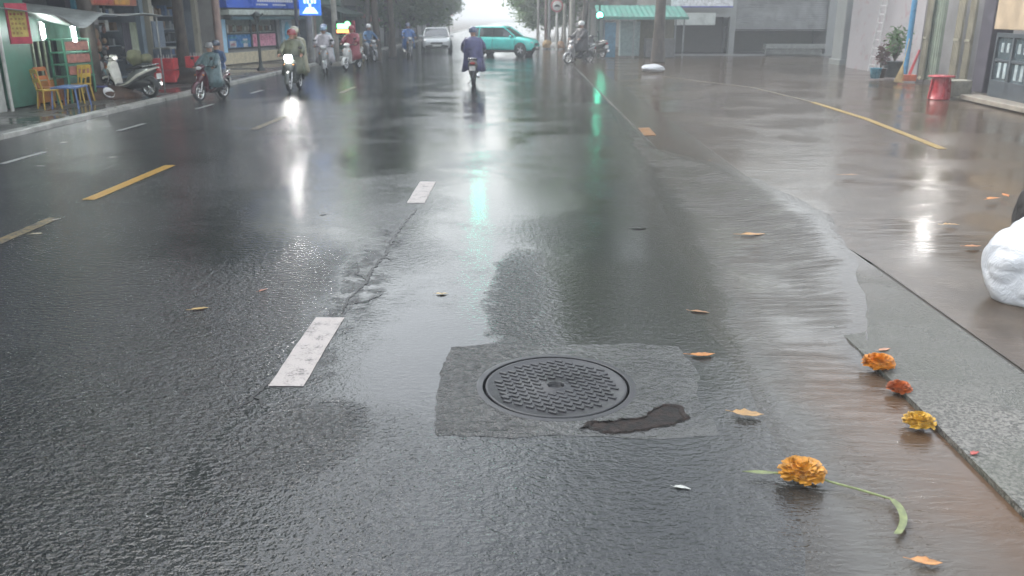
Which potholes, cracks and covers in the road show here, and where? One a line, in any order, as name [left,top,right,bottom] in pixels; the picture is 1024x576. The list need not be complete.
crack [341,209,417,313]
pothole [579,404,691,434]
